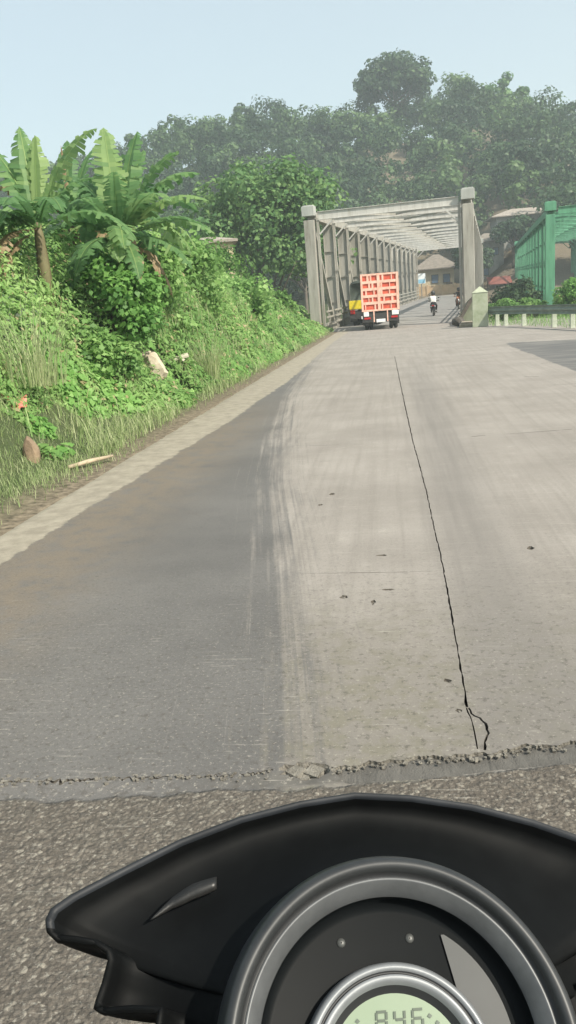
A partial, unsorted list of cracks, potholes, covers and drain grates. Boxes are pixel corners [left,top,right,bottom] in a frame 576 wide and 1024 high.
crack [312,360,576,784]
